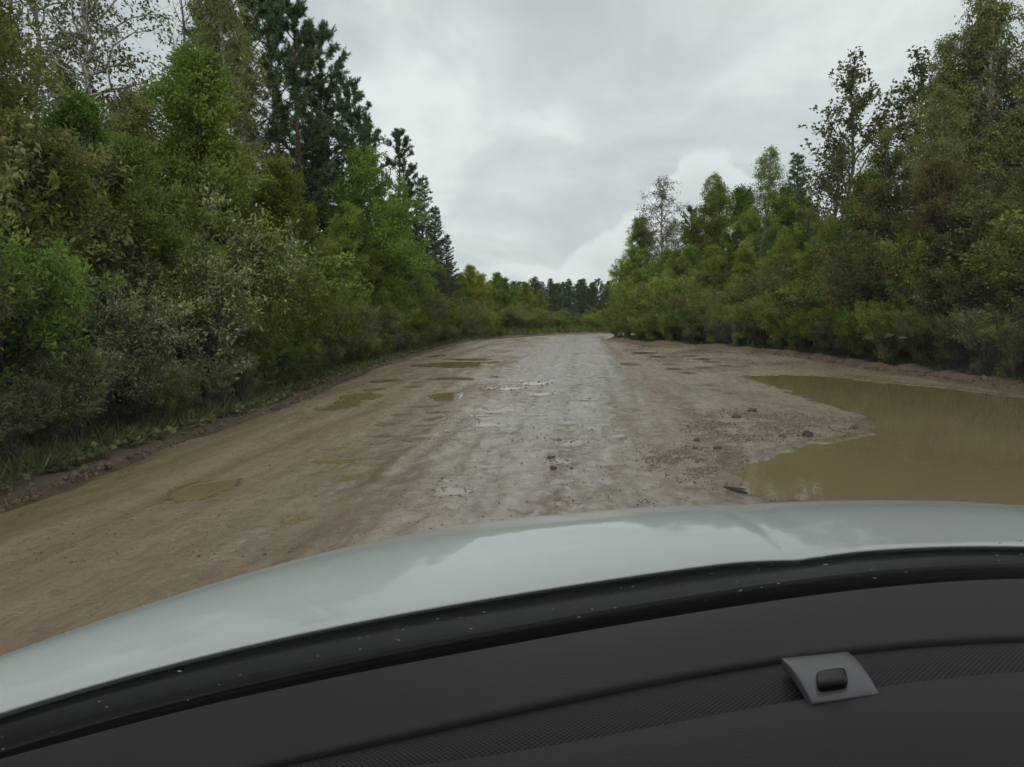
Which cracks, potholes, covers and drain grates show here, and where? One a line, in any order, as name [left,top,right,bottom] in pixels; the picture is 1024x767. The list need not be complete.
pothole [432,486,481,498]
pothole [279,513,320,526]
pothole [708,374,1024,505]
pothole [315,392,382,412]
pothole [154,478,246,504]
pothole [428,392,464,402]
